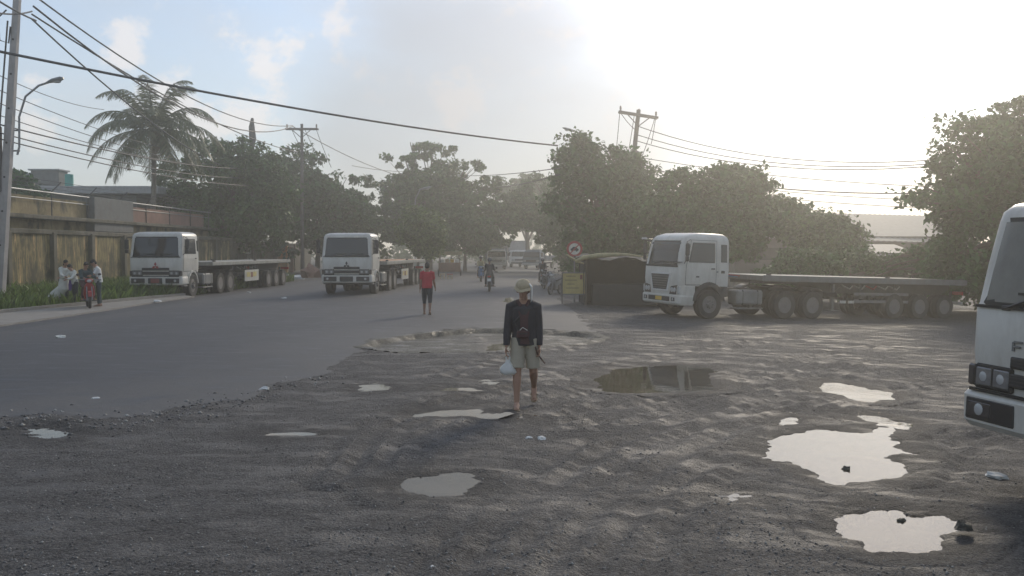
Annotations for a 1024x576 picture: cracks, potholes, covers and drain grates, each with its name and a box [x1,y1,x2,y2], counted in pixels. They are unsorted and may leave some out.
pothole [720,421,951,495]
pothole [799,377,922,407]
pothole [570,362,743,398]
pothole [369,401,522,424]
pothole [790,495,1024,568]
